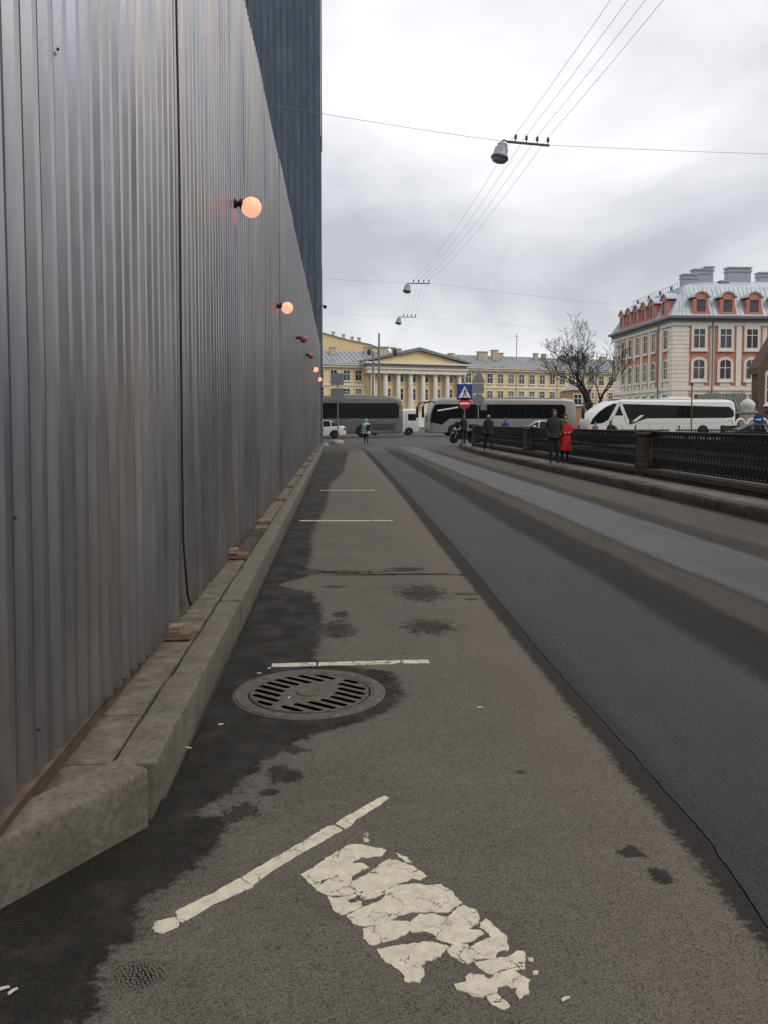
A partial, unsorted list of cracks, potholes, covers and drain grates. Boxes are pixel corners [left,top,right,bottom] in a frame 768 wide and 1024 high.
manhole cover [232,669,385,720]
